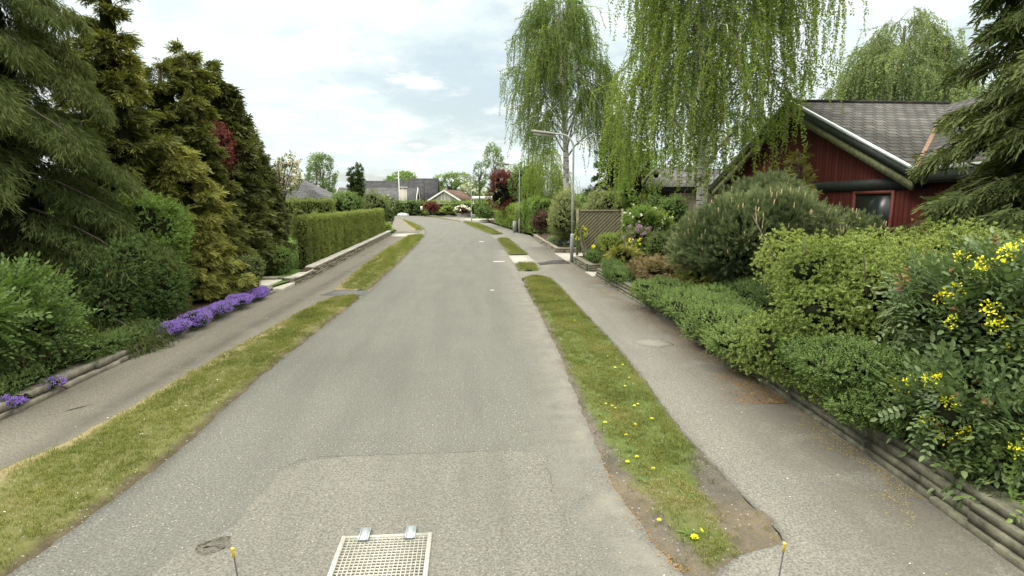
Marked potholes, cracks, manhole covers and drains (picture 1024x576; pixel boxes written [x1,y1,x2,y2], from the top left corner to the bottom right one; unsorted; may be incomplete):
drain grate [327,525,433,576]
pothole [194,535,232,556]
